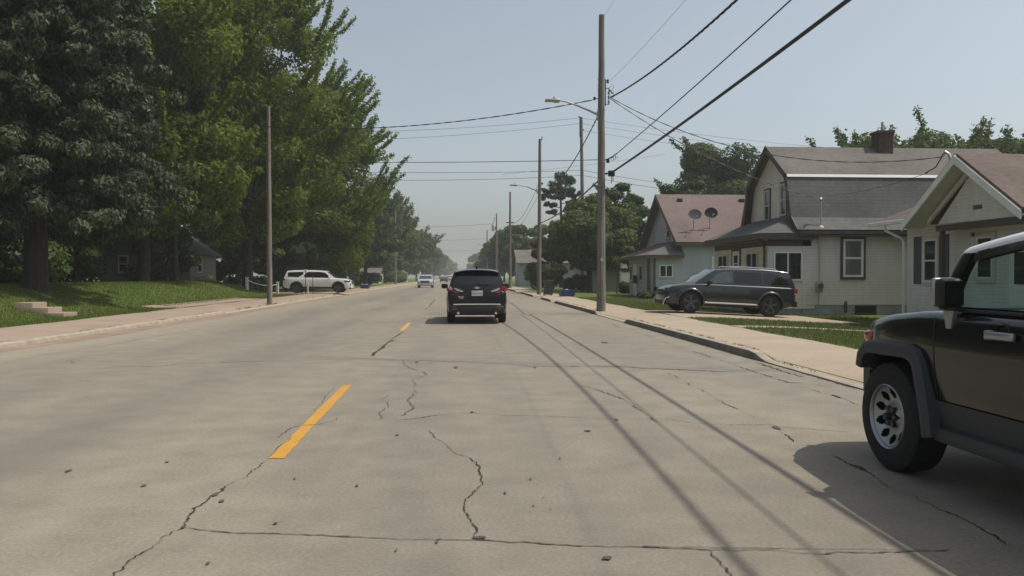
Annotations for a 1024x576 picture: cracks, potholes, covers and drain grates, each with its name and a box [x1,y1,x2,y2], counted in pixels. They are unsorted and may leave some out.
crack [113,390,337,576]
crack [429,431,483,534]
crack [371,333,427,419]
crack [832,454,1009,546]
